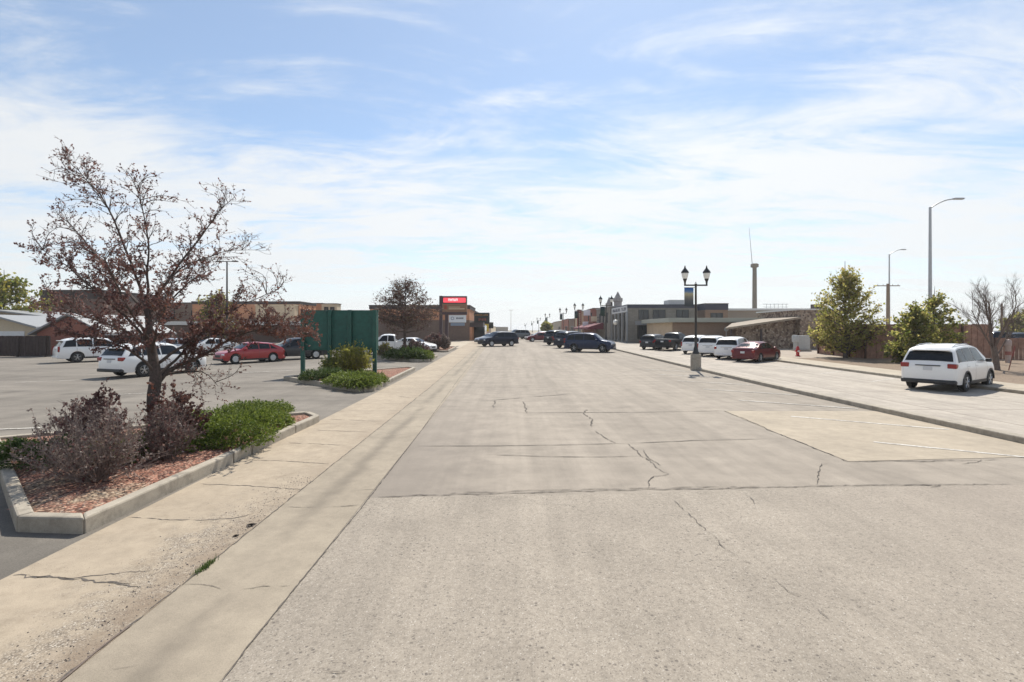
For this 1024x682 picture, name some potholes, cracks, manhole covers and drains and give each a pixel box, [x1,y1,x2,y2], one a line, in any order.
crack [17,570,151,588]
crack [335,410,995,634]
